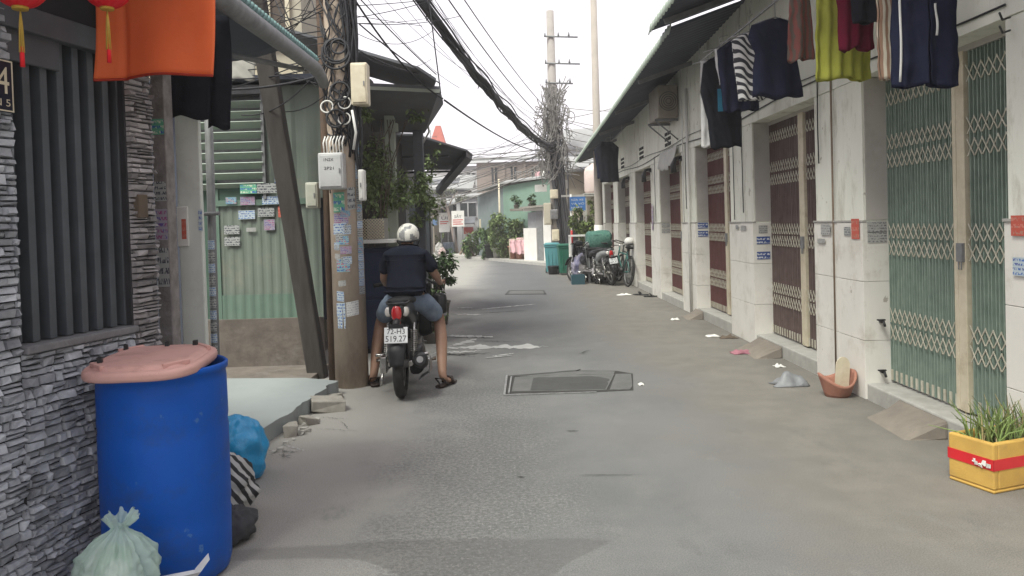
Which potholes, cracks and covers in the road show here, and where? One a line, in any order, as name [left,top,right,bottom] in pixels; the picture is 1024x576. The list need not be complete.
manhole cover [503,369,633,396]
